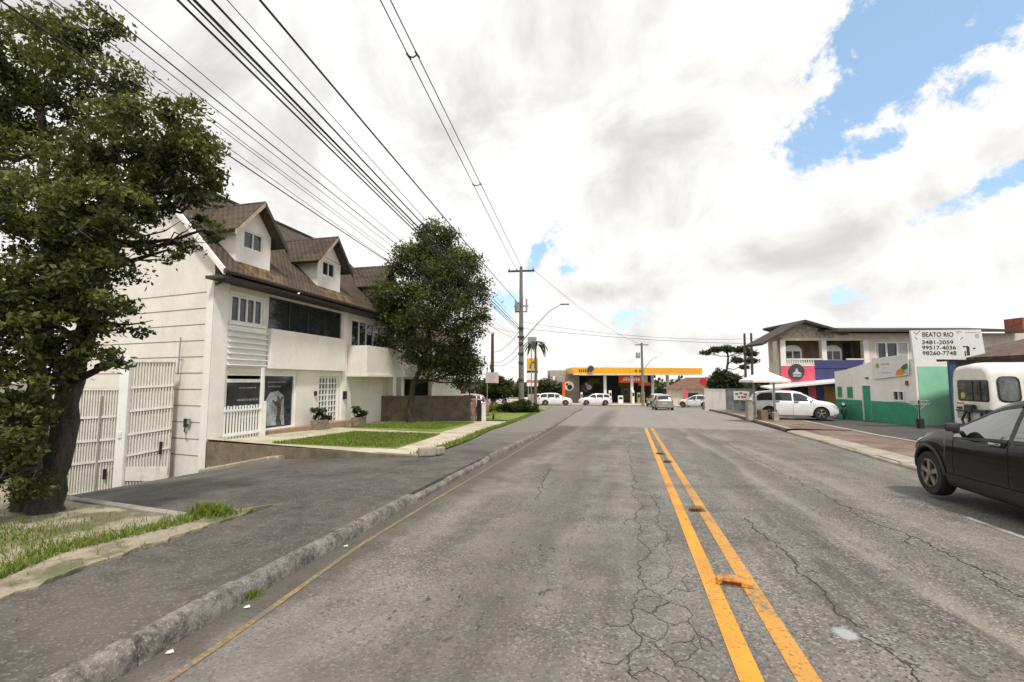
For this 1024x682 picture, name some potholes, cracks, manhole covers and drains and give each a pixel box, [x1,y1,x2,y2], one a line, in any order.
crack [701,430,1024,598]
crack [602,432,717,682]
crack [744,518,920,682]
